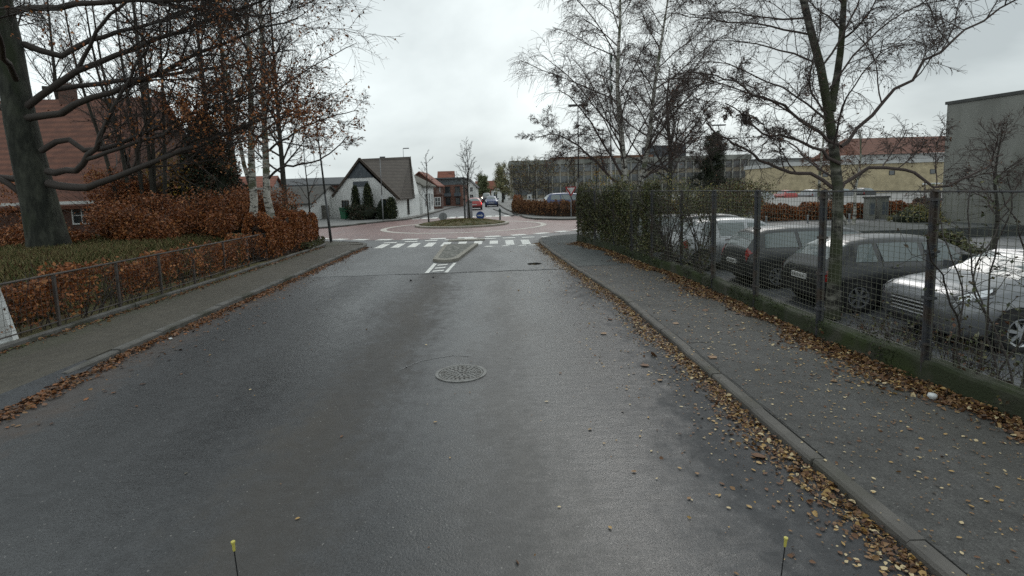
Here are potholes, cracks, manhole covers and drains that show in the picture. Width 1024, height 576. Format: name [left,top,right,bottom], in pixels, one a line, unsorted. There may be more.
manhole cover [435,364,487,383]
